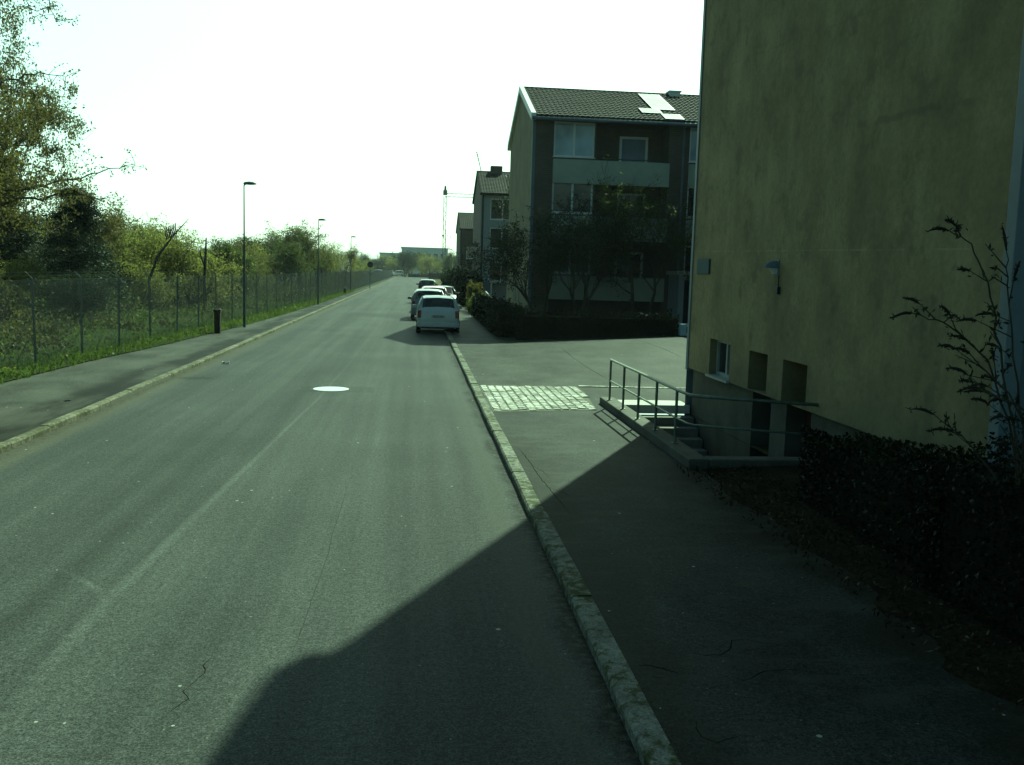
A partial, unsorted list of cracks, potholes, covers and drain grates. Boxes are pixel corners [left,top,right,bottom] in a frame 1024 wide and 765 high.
crack [289,481,349,662]
crack [167,656,212,714]
crack [694,639,808,743]
crack [521,451,569,513]
